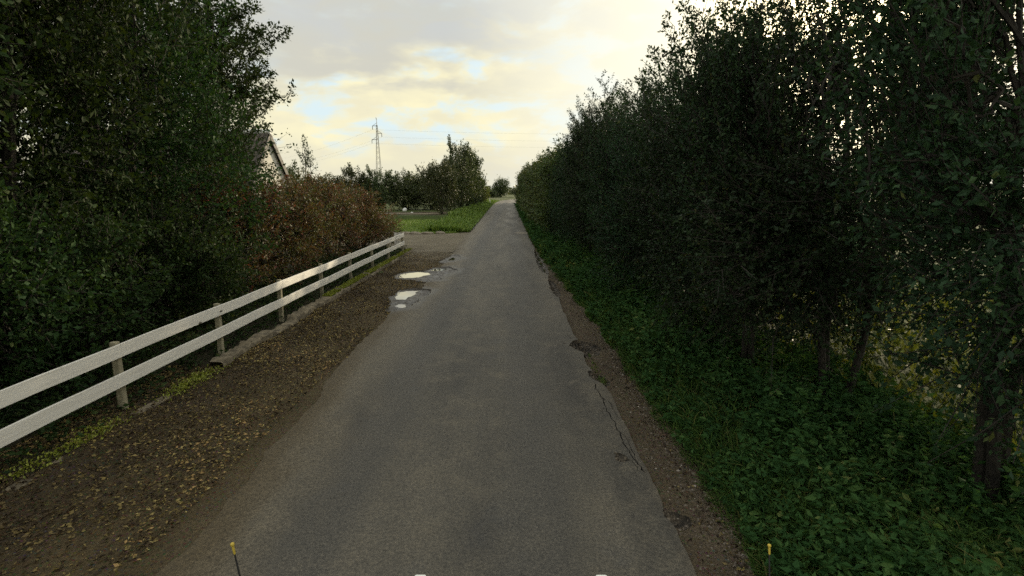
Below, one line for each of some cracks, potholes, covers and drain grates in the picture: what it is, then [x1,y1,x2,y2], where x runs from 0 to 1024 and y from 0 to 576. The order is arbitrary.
pothole [385,288,432,312]
crack [595,384,644,472]
pothole [395,266,458,282]
pothole [569,340,602,358]
